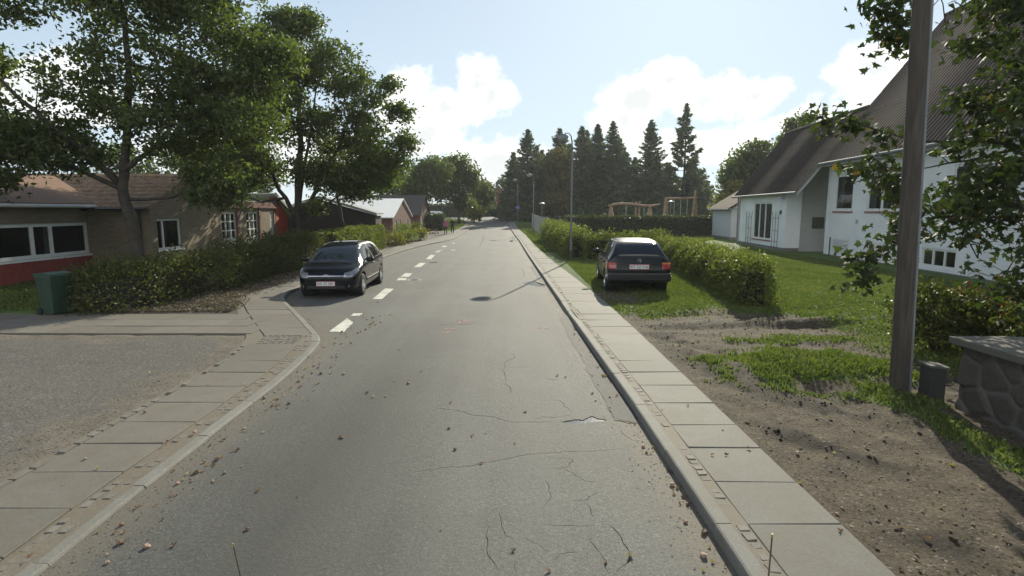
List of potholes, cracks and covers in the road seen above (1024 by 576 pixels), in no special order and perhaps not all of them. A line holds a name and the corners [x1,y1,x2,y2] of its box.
pothole [563,416,606,424]
crack [417,397,635,574]
